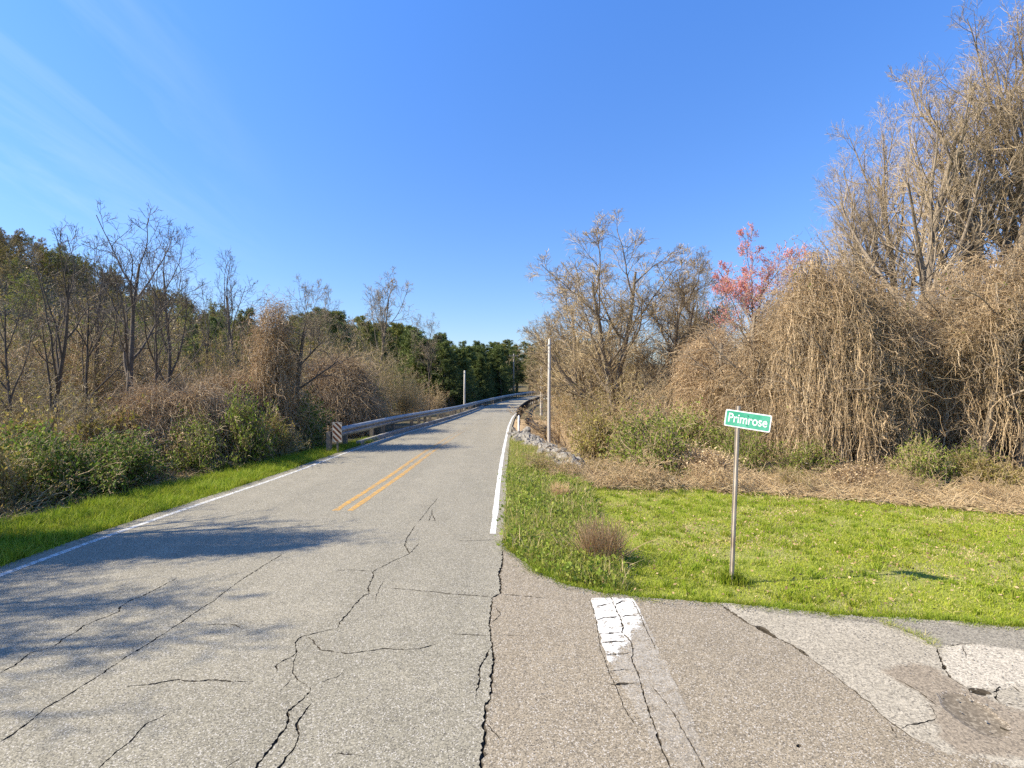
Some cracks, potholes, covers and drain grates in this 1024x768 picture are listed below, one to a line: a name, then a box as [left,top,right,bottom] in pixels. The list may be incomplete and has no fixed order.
crack [1,498,542,768]
pothole [937,690,1013,739]
